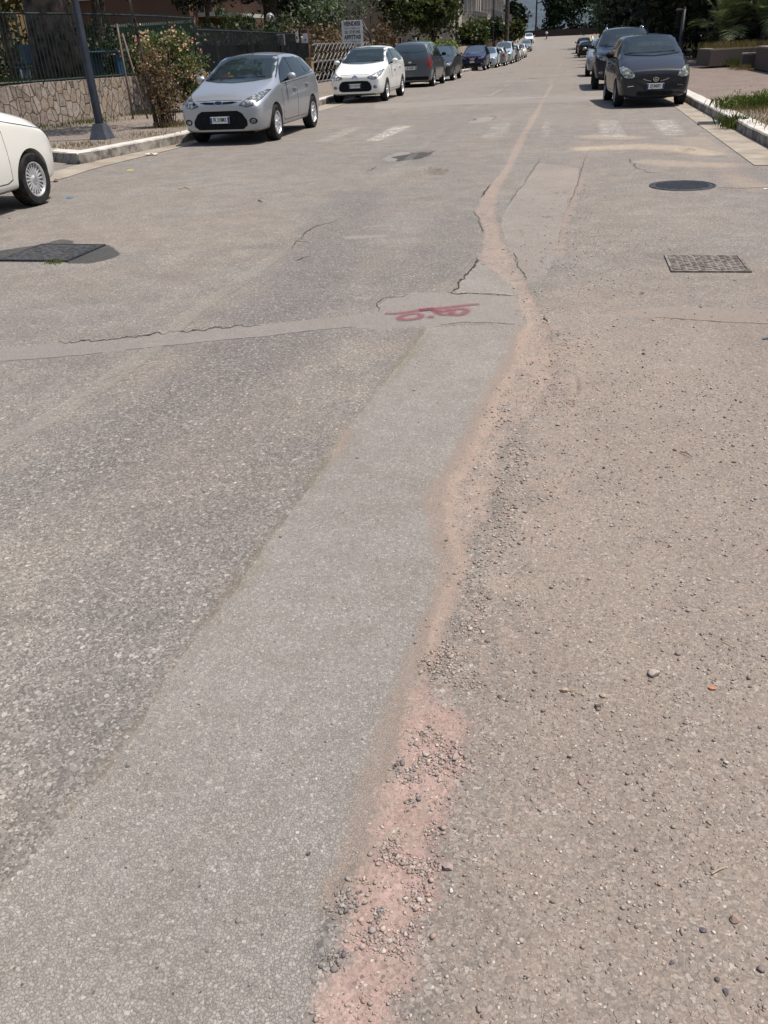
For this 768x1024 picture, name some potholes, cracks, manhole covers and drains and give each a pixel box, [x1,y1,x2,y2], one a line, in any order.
crack [8,325,348,361]
crack [450,254,527,296]
manhole cover [649,180,716,191]
